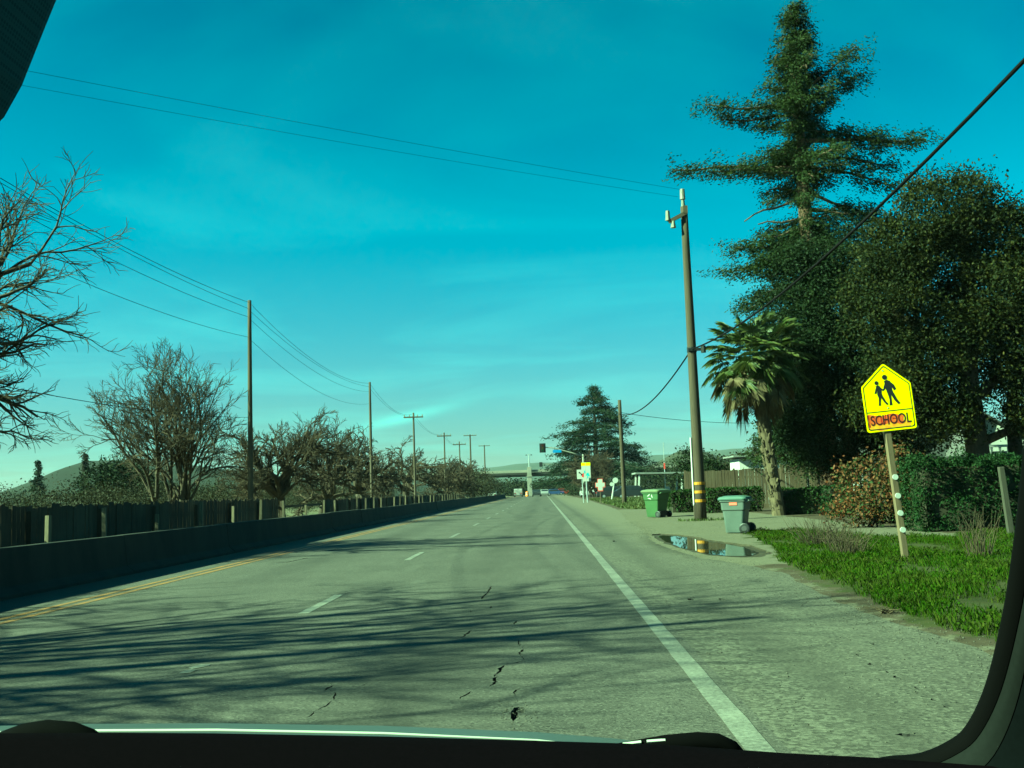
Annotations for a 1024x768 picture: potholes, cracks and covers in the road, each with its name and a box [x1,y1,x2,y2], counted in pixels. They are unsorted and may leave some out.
crack [489,641,524,695]
crack [308,683,342,717]
